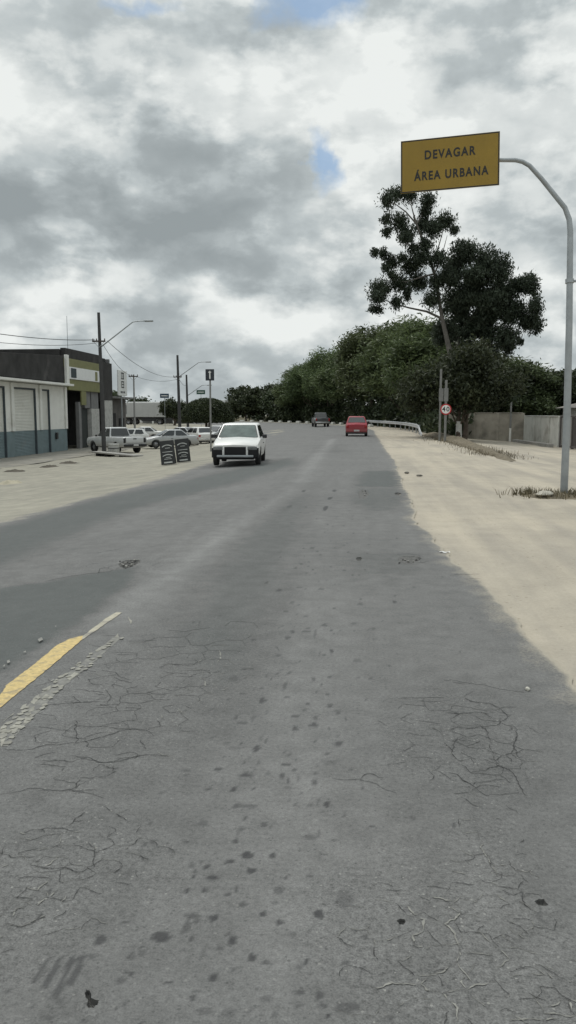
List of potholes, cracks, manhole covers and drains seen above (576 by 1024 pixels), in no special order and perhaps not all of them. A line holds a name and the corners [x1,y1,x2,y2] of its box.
crack [1,806,175,953]
crack [330,818,576,1024]
pothole [391,555,427,565]
pothole [111,559,146,570]
crack [3,621,279,798]
crack [380,680,542,813]
